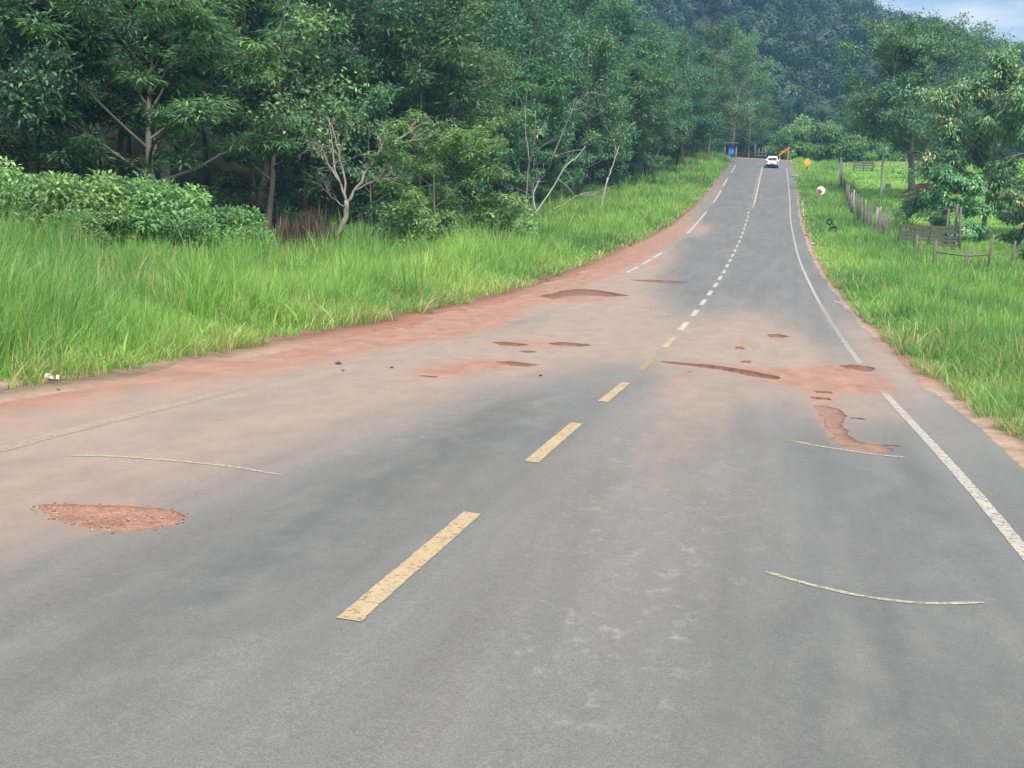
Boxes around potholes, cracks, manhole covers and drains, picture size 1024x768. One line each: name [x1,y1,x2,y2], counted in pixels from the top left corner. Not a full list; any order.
pothole [541,289,629,299]
pothole [839,364,876,372]
pothole [814,405,893,453]
pothole [31,501,189,533]
pothole [661,361,781,379]
